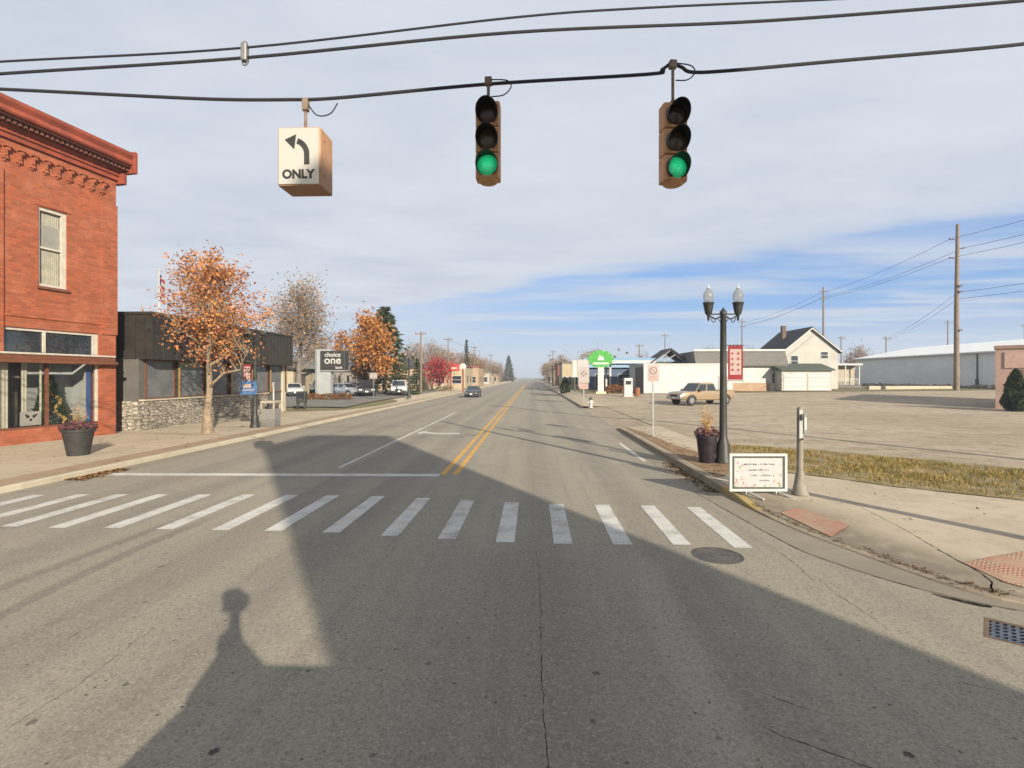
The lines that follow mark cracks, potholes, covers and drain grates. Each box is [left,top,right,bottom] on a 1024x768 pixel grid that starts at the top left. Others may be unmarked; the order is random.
crack [764,727,872,768]
drain grate [984,617,1024,647]
manhole cover [691,547,744,564]
